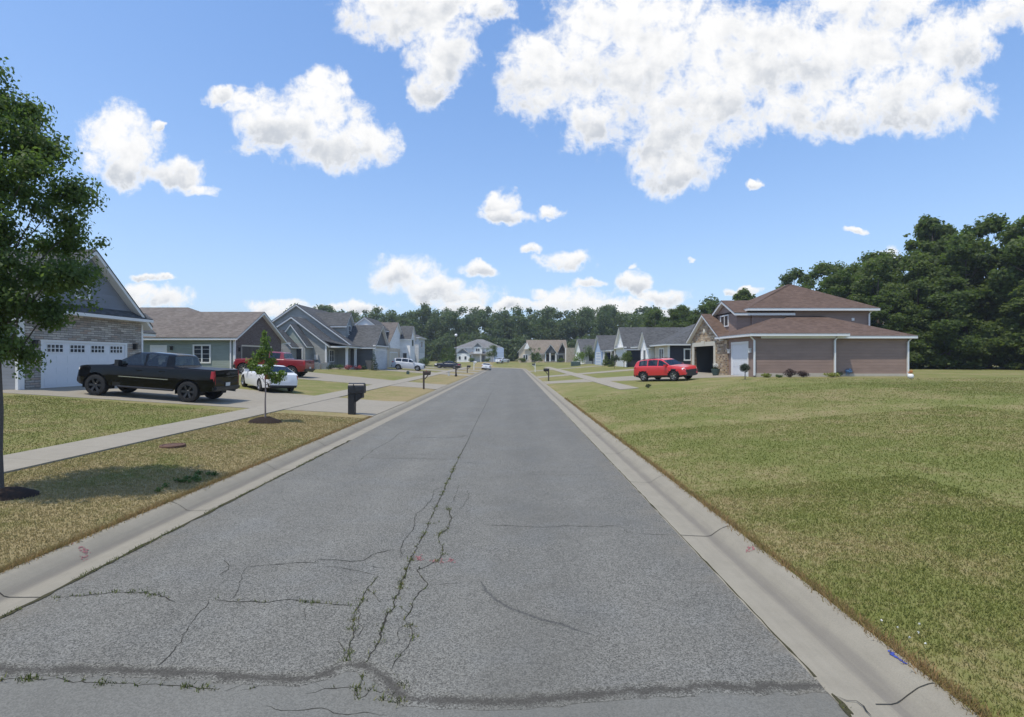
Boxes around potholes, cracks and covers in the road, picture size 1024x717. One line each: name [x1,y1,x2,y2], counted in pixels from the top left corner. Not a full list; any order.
crack [51,588,175,602]
crack [137,404,486,715]
crack [479,580,594,635]
